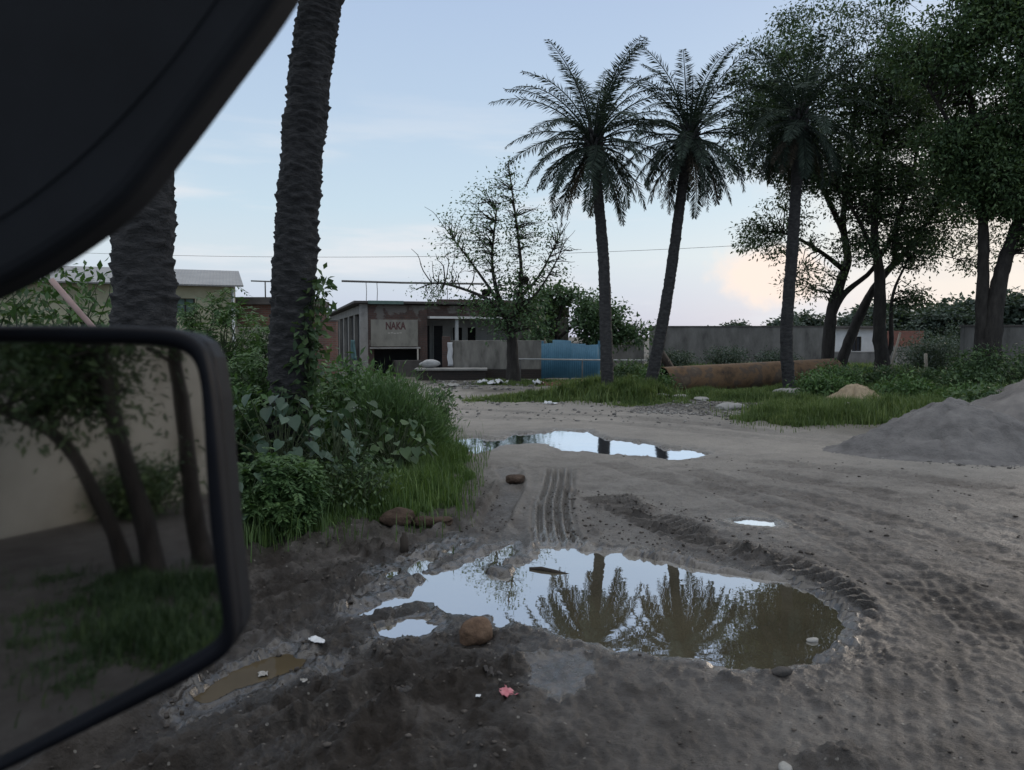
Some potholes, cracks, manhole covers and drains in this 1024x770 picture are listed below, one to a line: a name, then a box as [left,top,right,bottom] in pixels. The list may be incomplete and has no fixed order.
pothole [451,428,716,460]
pothole [732,518,779,527]
pothole [343,540,861,673]
pothole [179,645,316,707]
